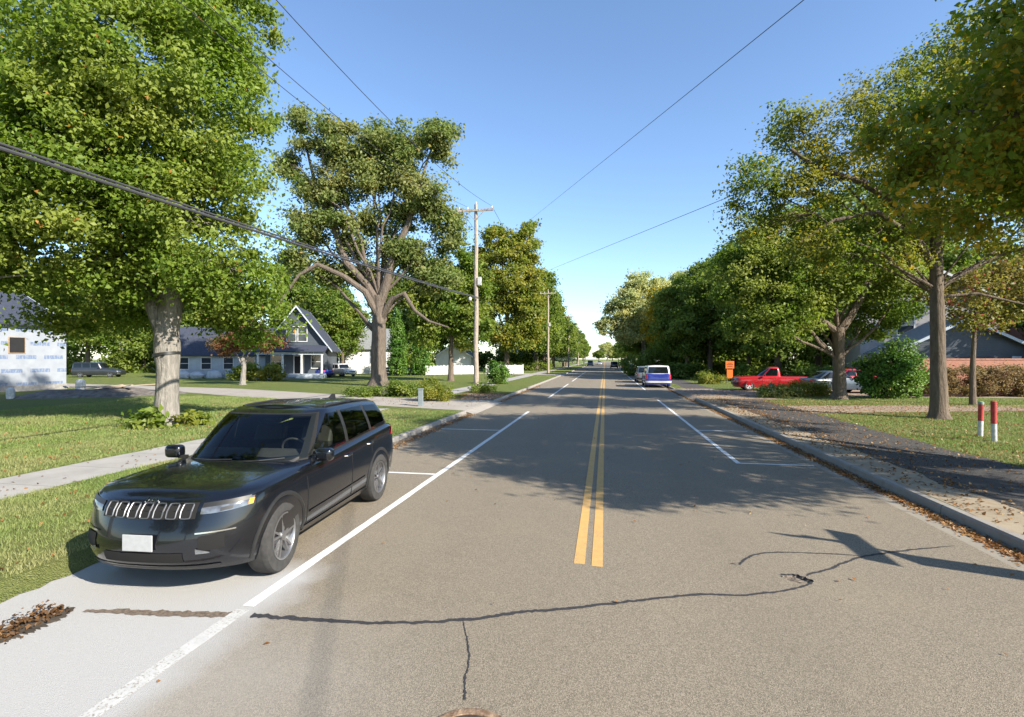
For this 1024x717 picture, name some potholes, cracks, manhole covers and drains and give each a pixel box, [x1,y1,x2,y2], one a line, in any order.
crack [83,545,954,700]
pothole [779,574,814,584]
manhole cover [439,708,501,717]
